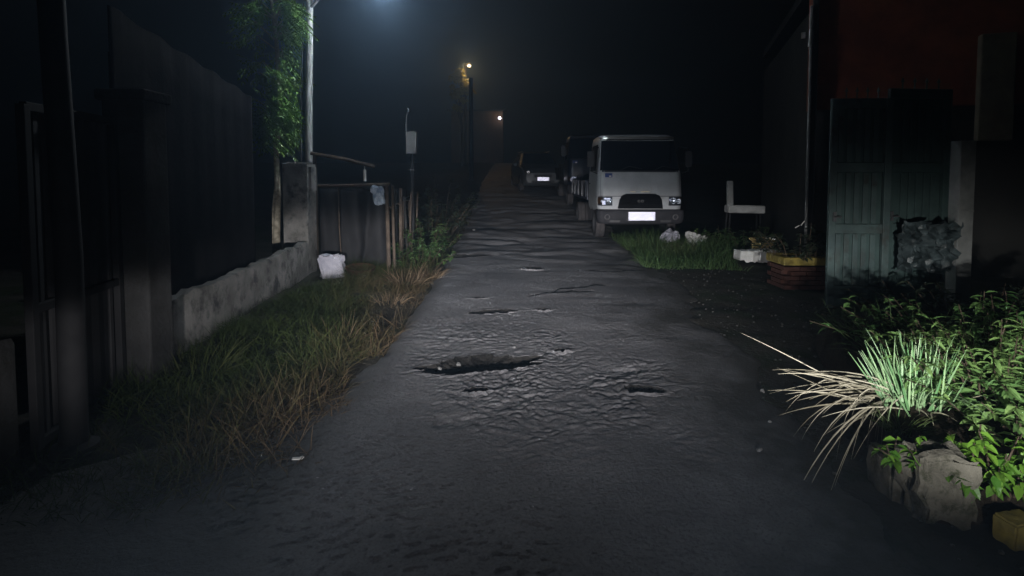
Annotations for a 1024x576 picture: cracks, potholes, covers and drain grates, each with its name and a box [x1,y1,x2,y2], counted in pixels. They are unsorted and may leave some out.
pothole [617,383,676,397]
pothole [456,386,494,397]
crack [529,270,643,297]
pothole [549,347,575,356]
pothole [404,353,555,378]
